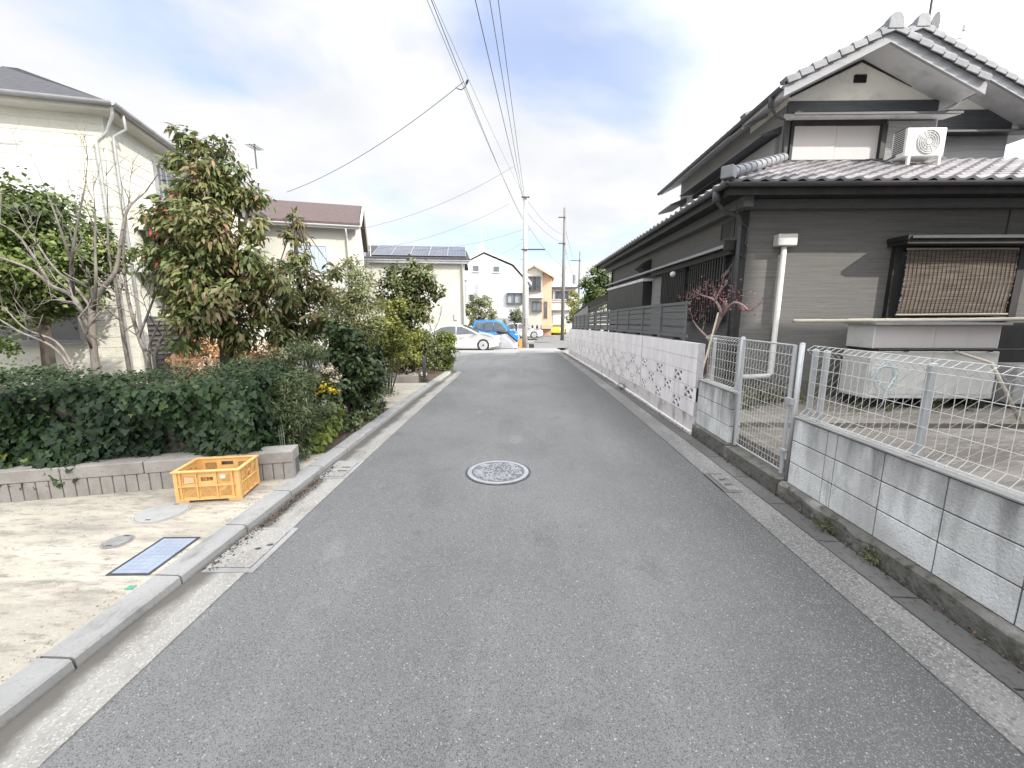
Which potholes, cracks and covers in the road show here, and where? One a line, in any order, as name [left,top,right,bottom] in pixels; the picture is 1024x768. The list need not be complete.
manhole cover [100,534,135,549]
manhole cover [465,460,531,486]
manhole cover [132,502,191,524]
